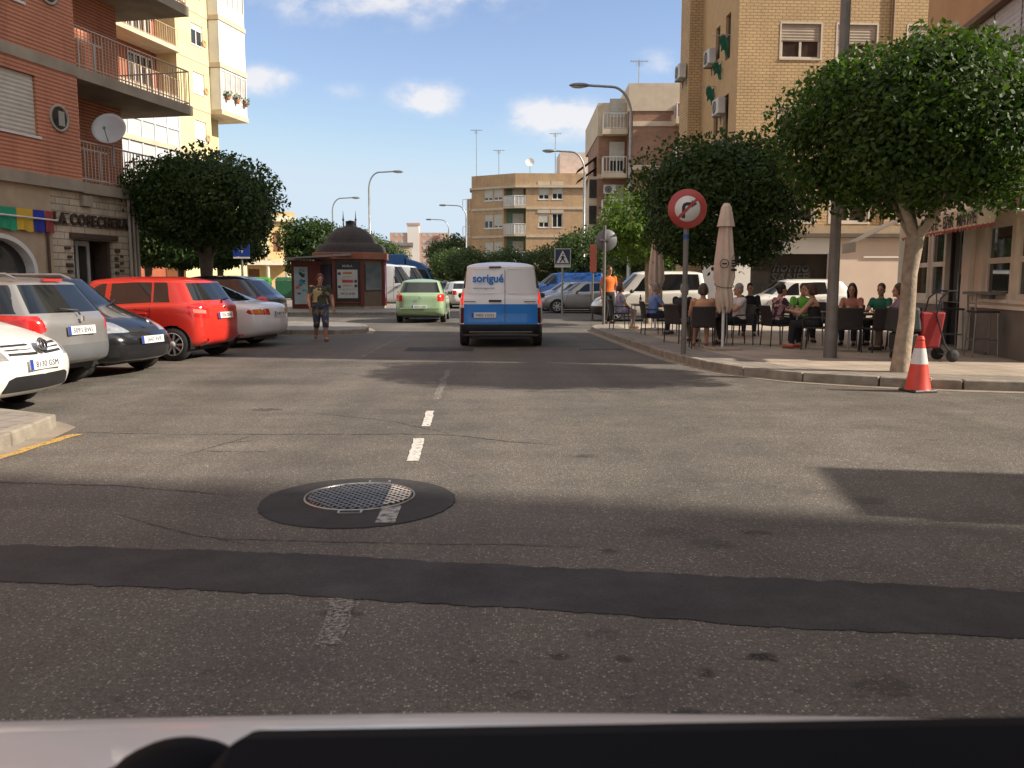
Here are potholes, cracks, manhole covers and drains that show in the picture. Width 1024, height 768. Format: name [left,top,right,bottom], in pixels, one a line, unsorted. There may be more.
crack [103,412,544,453]
manhole cover [257,478,455,529]
crack [7,482,237,496]
crack [115,513,581,547]
